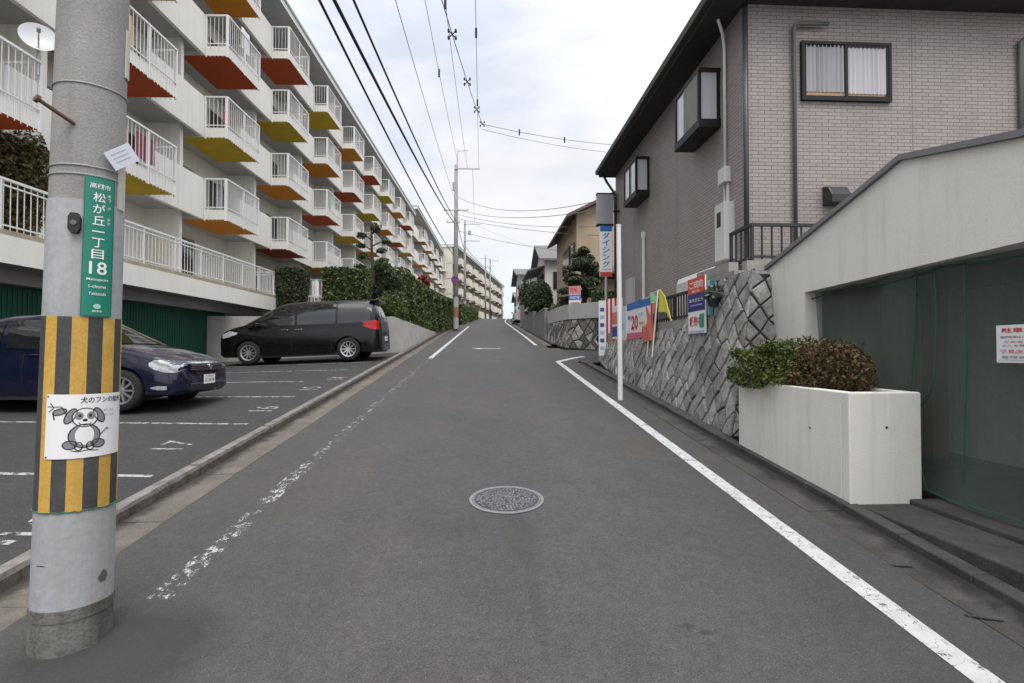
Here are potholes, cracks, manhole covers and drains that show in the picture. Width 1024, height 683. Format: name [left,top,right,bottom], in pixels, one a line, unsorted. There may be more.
manhole cover [469,486,544,514]
crack [963,613,1003,621]
